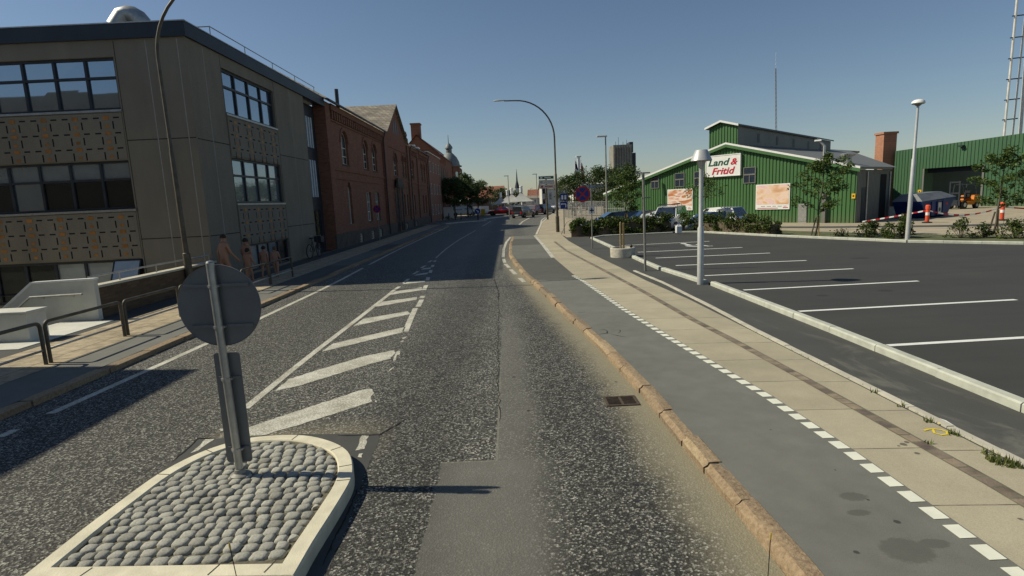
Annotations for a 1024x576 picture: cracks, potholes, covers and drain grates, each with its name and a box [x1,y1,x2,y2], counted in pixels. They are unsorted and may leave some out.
crack [484,279,501,420]
drain grate [603,395,640,407]
